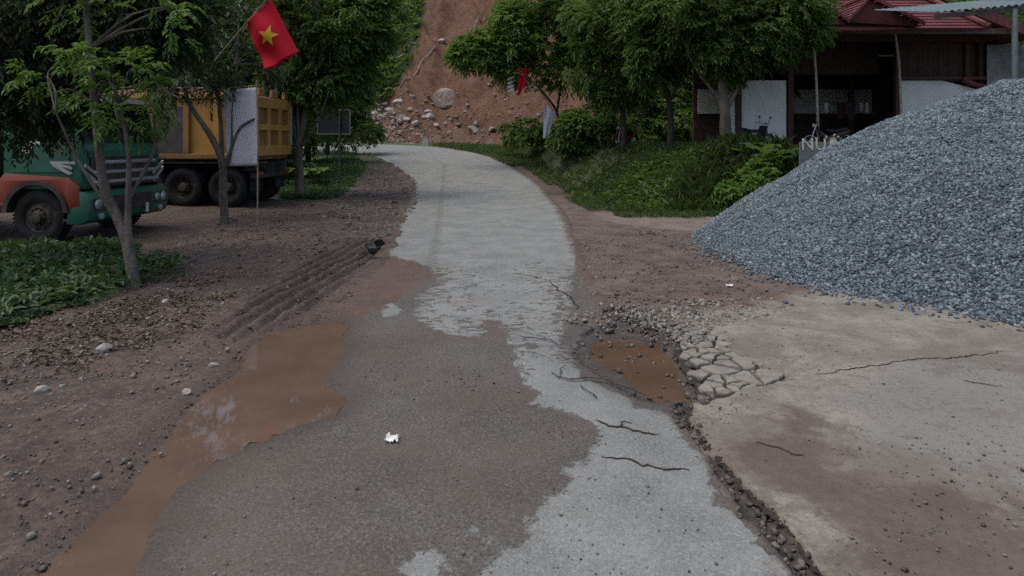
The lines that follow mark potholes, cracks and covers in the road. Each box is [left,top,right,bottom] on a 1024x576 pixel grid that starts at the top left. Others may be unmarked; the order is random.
pothole [570,320,716,406]
crack [552,327,823,576]
crack [514,273,579,310]
